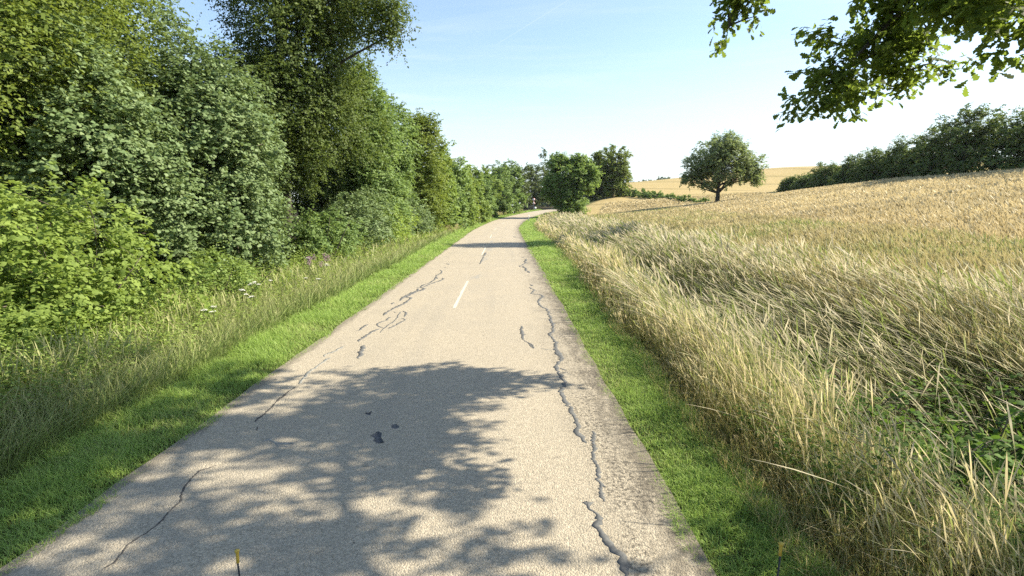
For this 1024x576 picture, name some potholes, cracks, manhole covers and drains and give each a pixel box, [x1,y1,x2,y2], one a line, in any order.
crack [102,465,216,570]
crack [254,387,296,447]
